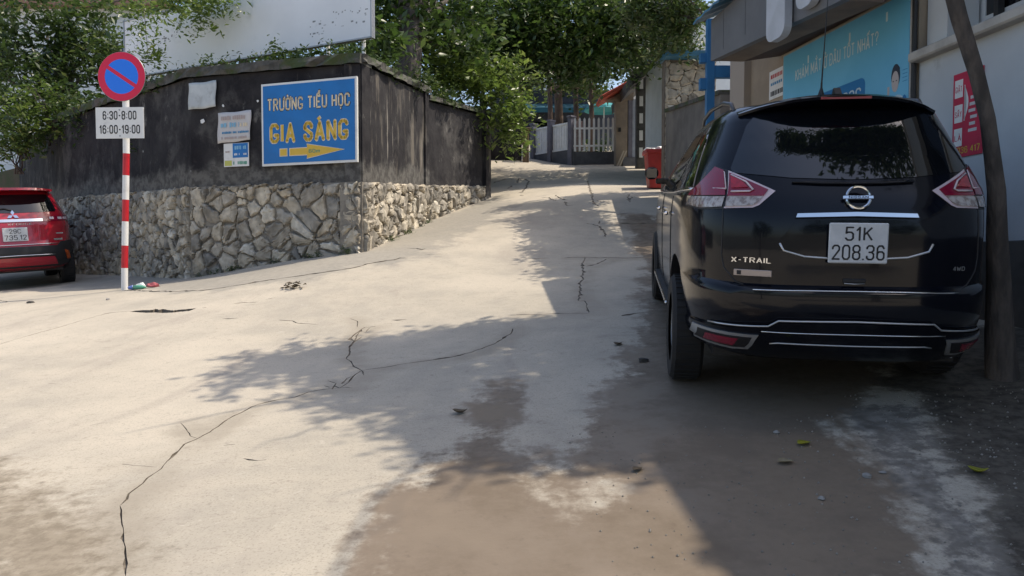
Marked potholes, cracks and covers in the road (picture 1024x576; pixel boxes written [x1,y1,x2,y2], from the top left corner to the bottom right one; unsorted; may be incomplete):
crack [587,181,648,237]
crack [120,319,513,576]
